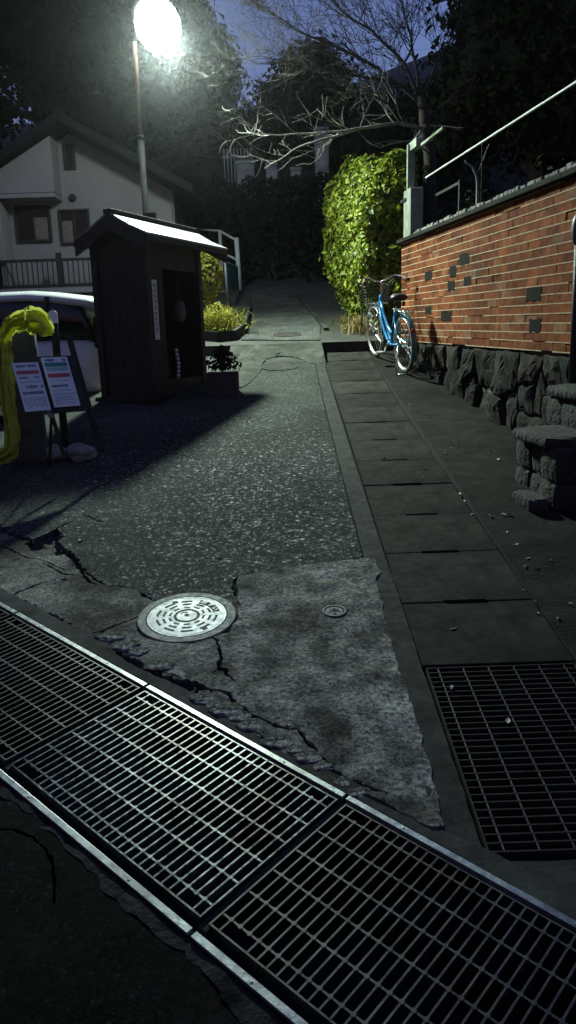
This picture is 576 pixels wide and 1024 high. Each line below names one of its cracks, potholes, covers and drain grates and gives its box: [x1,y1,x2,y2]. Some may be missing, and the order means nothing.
drain grate [10,691,338,923]
drain grate [426,663,576,859]
crack [0,523,153,601]
manhole cover [137,593,237,643]
crack [0,828,56,905]
crack [231,572,253,598]
drain grate [0,616,141,765]
drain grate [209,804,576,1024]
utility cover [322,605,347,617]
